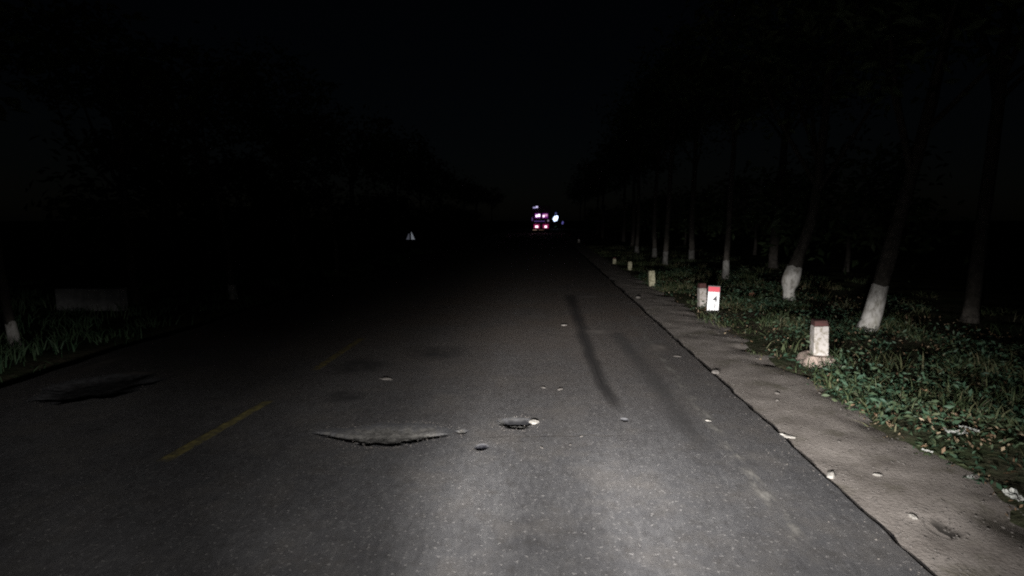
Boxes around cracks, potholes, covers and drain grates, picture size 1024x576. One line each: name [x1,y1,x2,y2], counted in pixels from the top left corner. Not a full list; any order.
pothole [496,417,536,430]
pothole [311,422,453,447]
pothole [24,370,167,405]
